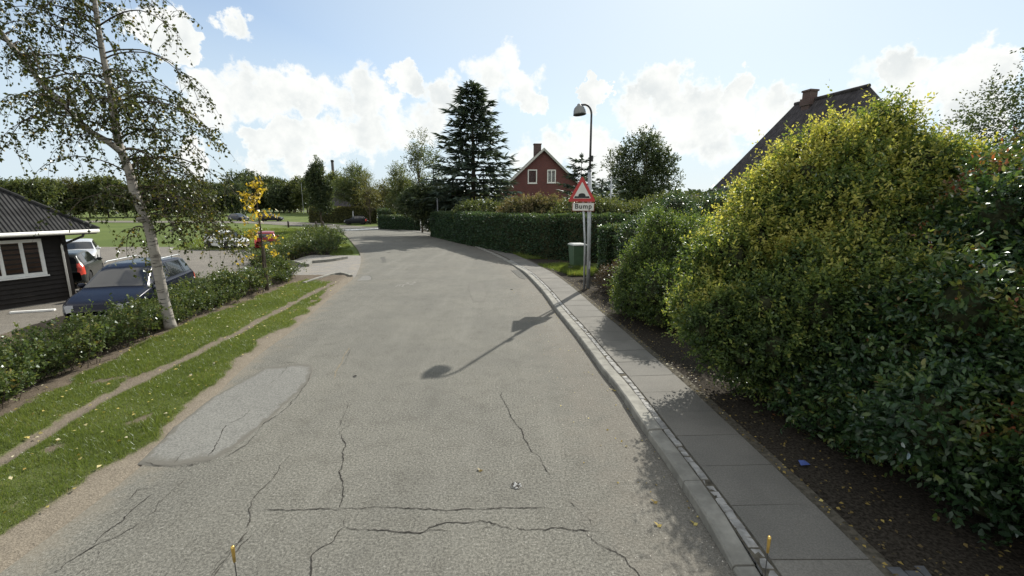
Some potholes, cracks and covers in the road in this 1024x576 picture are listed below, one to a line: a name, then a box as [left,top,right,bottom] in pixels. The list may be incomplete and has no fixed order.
crack [209,402,640,576]
crack [54,362,310,574]
